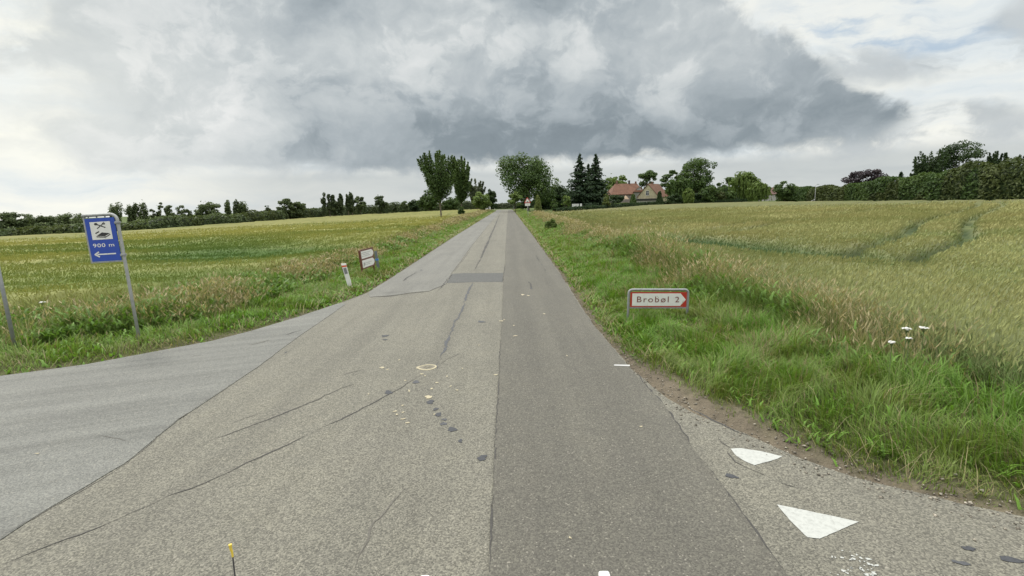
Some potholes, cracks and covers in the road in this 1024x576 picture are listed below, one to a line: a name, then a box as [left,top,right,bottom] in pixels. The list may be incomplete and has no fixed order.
crack [4,370,420,564]
